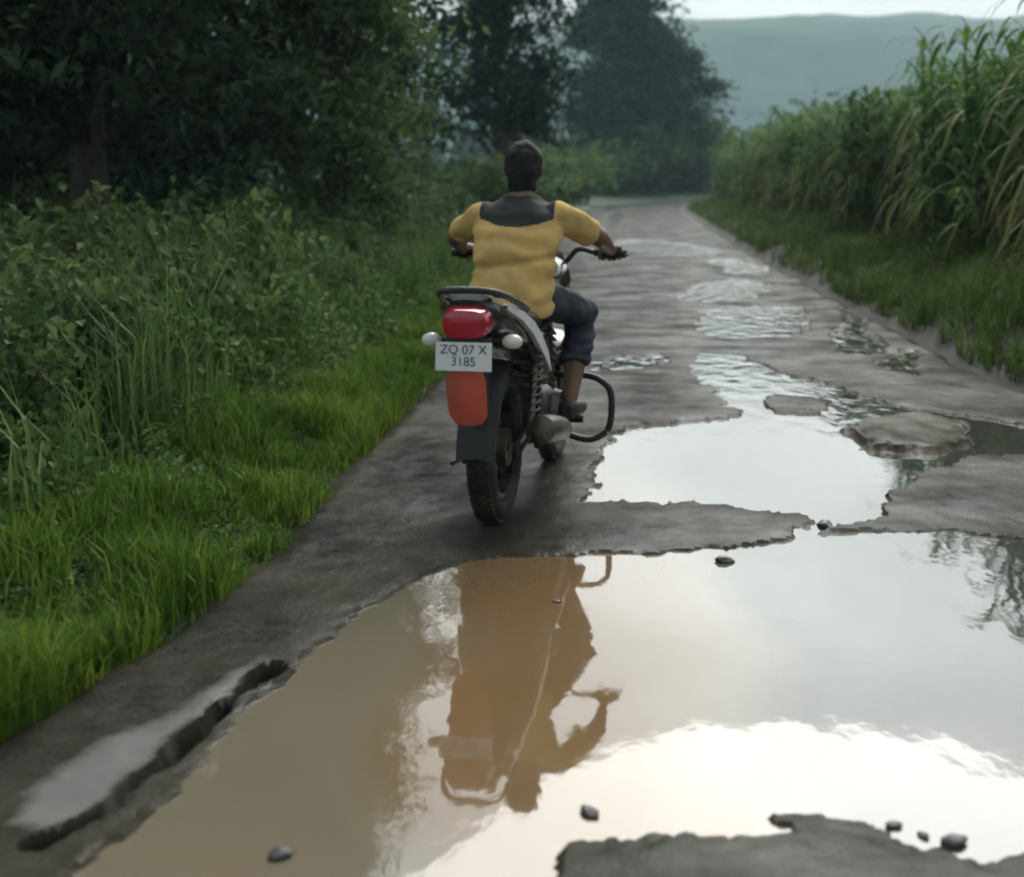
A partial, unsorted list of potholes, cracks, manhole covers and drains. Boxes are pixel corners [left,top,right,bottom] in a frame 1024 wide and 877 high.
pothole [705,258,772,275]
pothole [581,352,1024,538]
pothole [827,324,892,355]
pothole [673,278,773,303]
pothole [66,527,1024,877]
pothole [690,304,813,339]
